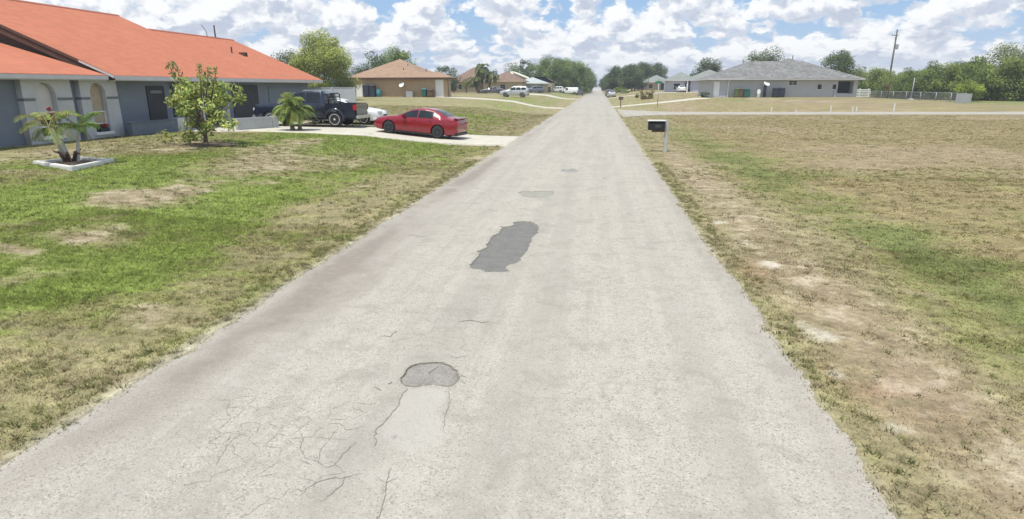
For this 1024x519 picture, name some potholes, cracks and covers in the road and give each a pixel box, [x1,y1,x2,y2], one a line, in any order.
crack [185,383,408,510]
